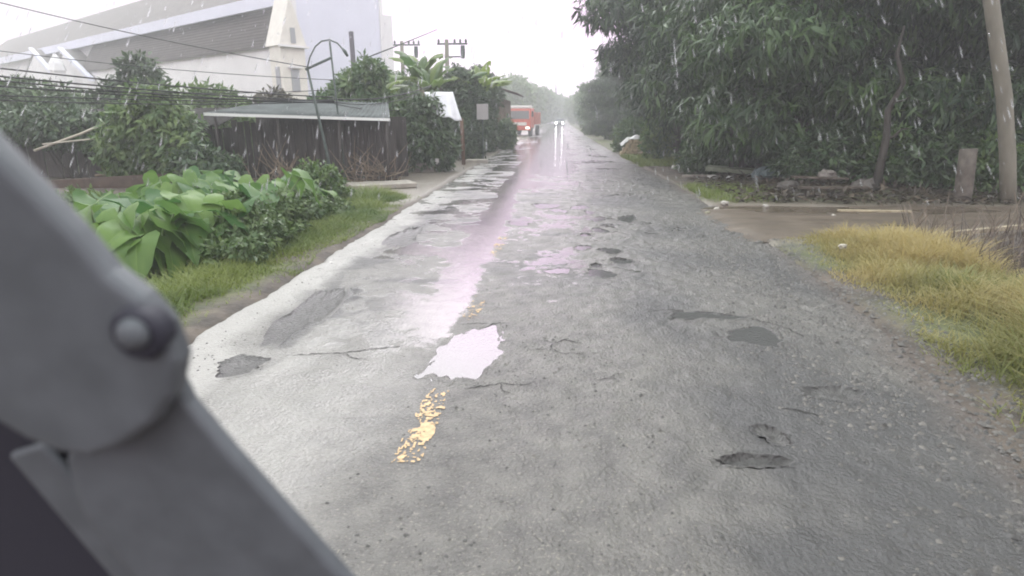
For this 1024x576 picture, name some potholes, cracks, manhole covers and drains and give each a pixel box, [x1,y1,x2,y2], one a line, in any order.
pothole [747,422,796,449]
pothole [723,324,787,350]
pothole [615,214,639,224]
pothole [605,257,637,265]
crack [469,382,532,395]
pothole [413,320,509,386]
pothole [594,247,624,255]
pothole [210,352,276,381]
pothole [249,284,351,354]
pothole [661,310,754,320]
pothole [584,268,620,279]
crack [297,346,398,359]
